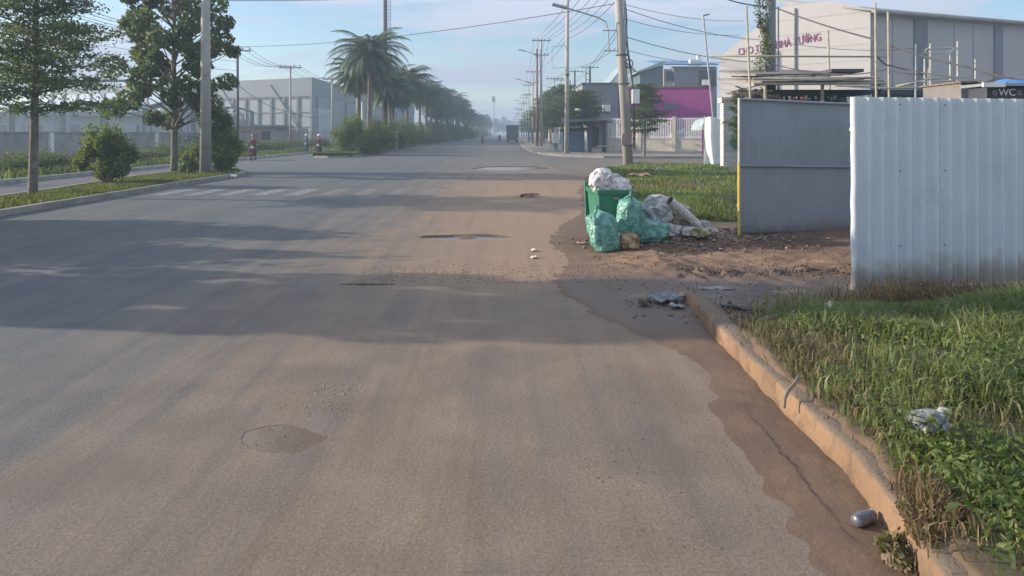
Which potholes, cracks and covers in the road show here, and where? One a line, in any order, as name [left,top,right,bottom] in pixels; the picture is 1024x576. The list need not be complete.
pothole [241,424,330,454]
crack [745,407,867,553]
